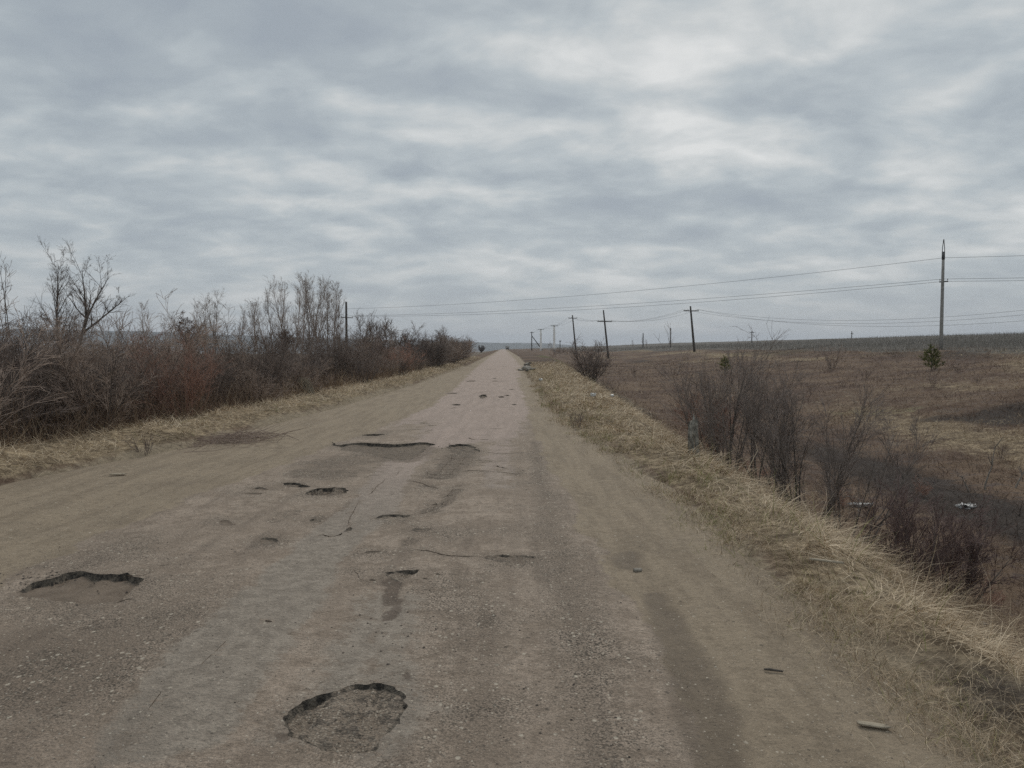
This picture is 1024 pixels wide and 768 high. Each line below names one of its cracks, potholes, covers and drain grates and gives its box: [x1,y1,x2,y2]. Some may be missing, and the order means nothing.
pothole [306,487,349,496]
pothole [385,569,419,581]
pothole [19,571,144,604]
pothole [283,683,408,756]
pothole [332,442,436,460]
pothole [447,444,481,454]
